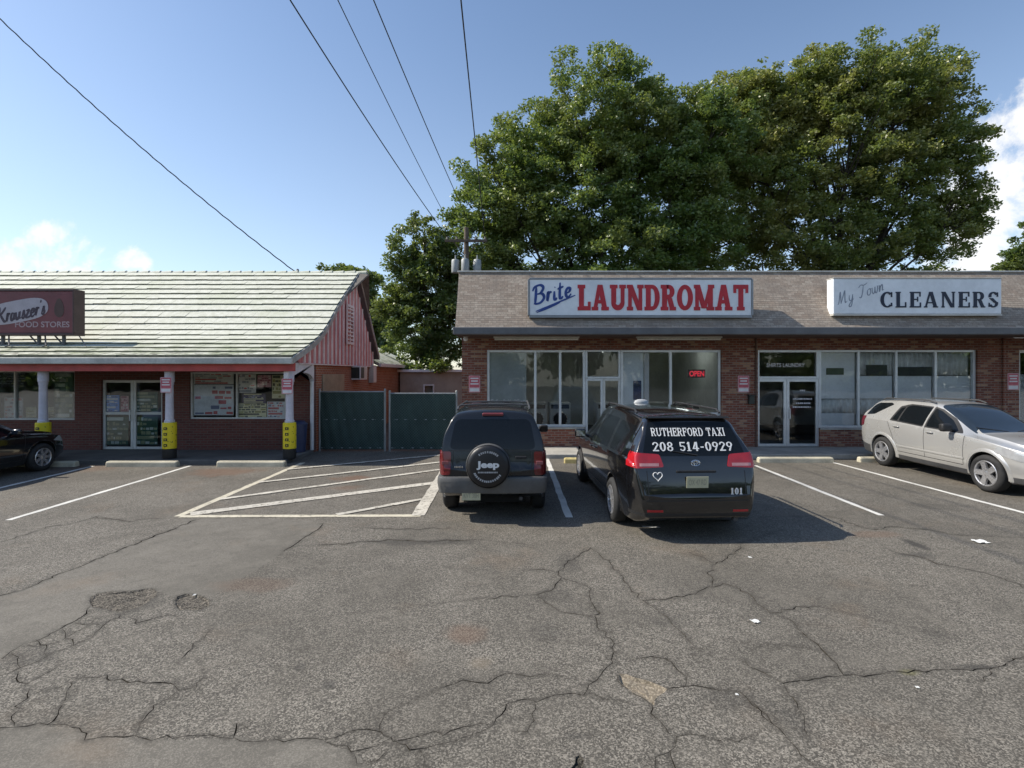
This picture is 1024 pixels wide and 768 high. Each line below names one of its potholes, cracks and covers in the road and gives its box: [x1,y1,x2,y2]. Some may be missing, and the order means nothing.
crack [0,610,260,742]
crack [268,546,1020,768]
pothole [175,594,210,610]
pothole [89,589,157,612]
crack [284,524,477,551]
